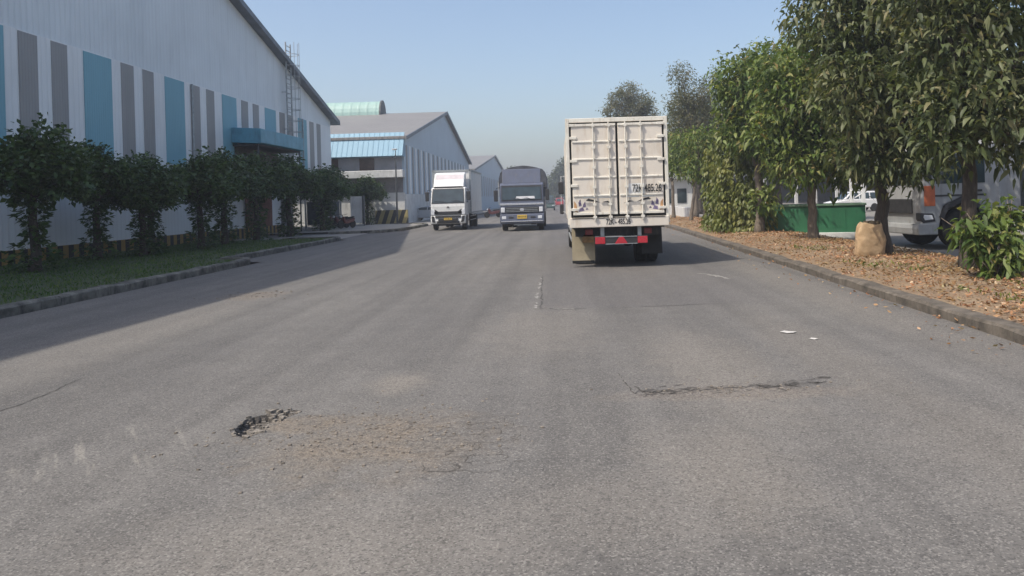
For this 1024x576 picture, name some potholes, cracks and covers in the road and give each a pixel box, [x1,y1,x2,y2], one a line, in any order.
pothole [229,408,302,438]
crack [420,415,530,472]
crack [617,372,831,396]
